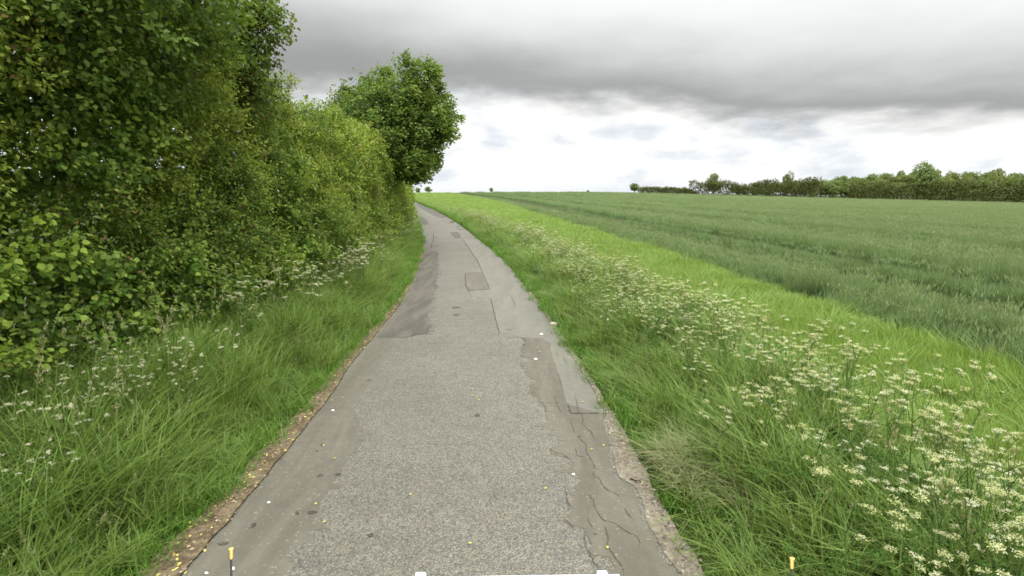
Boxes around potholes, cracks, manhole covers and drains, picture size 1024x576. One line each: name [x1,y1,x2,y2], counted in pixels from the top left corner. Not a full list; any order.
crack [542,349,640,572]
